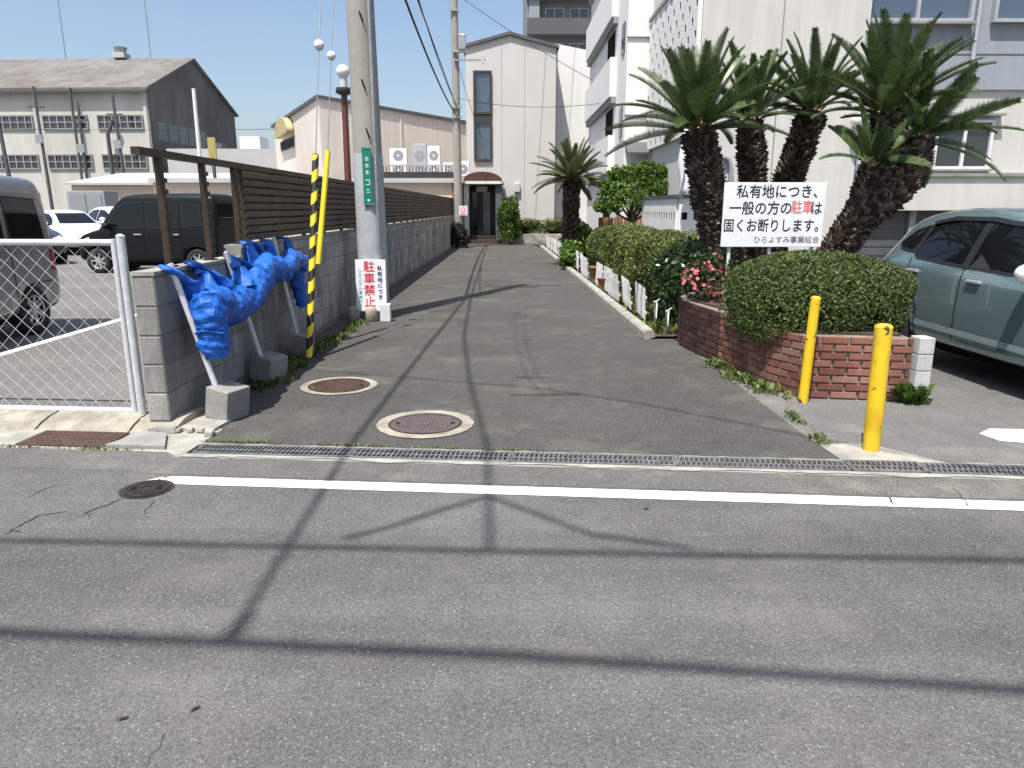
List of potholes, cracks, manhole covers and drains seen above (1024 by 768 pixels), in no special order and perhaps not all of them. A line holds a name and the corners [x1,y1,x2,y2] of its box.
manhole cover [300,377,377,395]
manhole cover [376,410,474,438]
drain grate [348,448,512,462]
manhole cover [118,480,174,499]
drain grate [510,452,678,466]
drain grate [843,459,930,473]
drain grate [918,462,1024,476]
drain grate [191,444,355,457]
drain grate [674,456,852,471]
